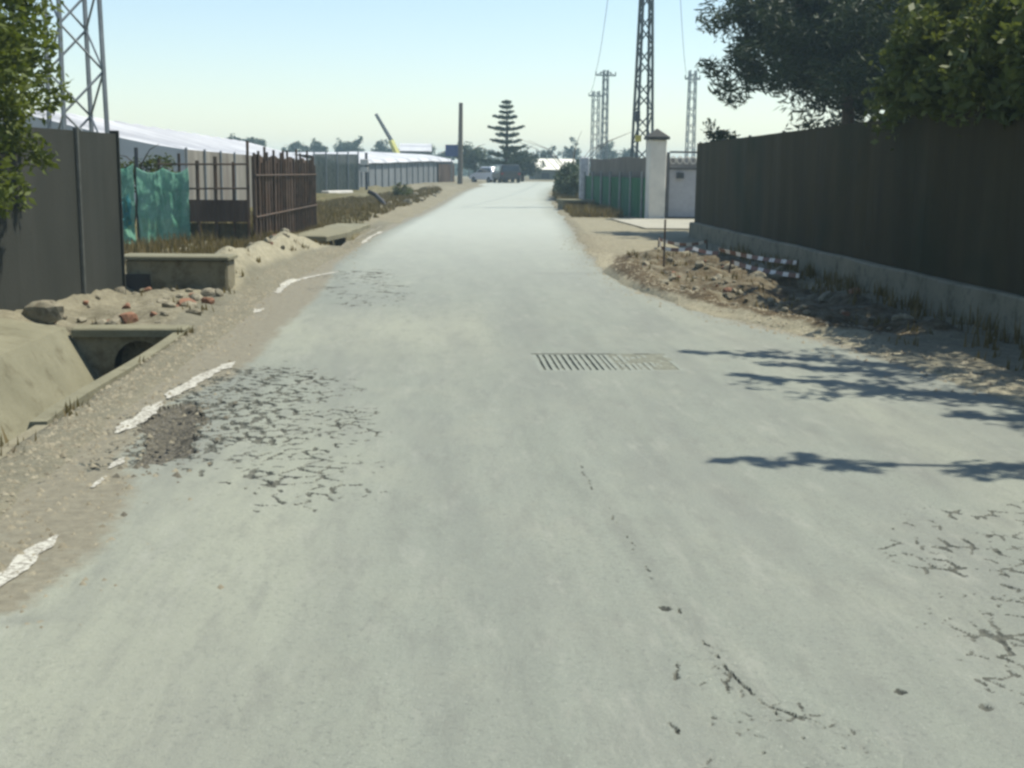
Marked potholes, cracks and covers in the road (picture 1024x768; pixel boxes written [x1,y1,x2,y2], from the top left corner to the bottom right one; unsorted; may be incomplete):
crack [37,361,387,512]
crack [580,466,868,768]
pothole [137,402,205,467]
drain grate [531,354,685,371]
crack [316,269,416,307]
crack [872,501,1024,705]
